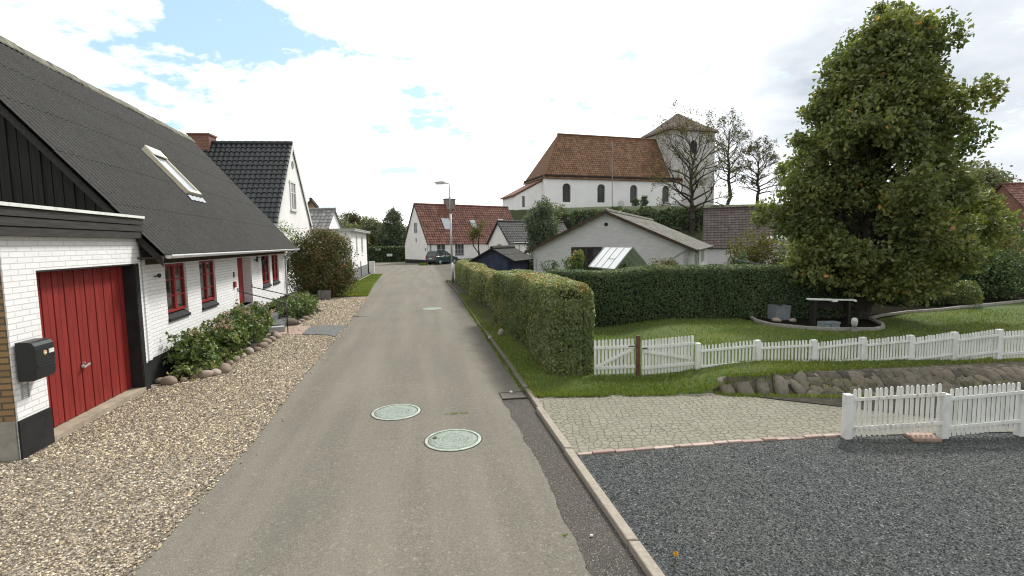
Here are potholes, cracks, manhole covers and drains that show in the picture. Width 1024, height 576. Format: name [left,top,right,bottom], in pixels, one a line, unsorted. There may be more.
manhole cover [424,429,482,452]
manhole cover [370,404,422,421]
